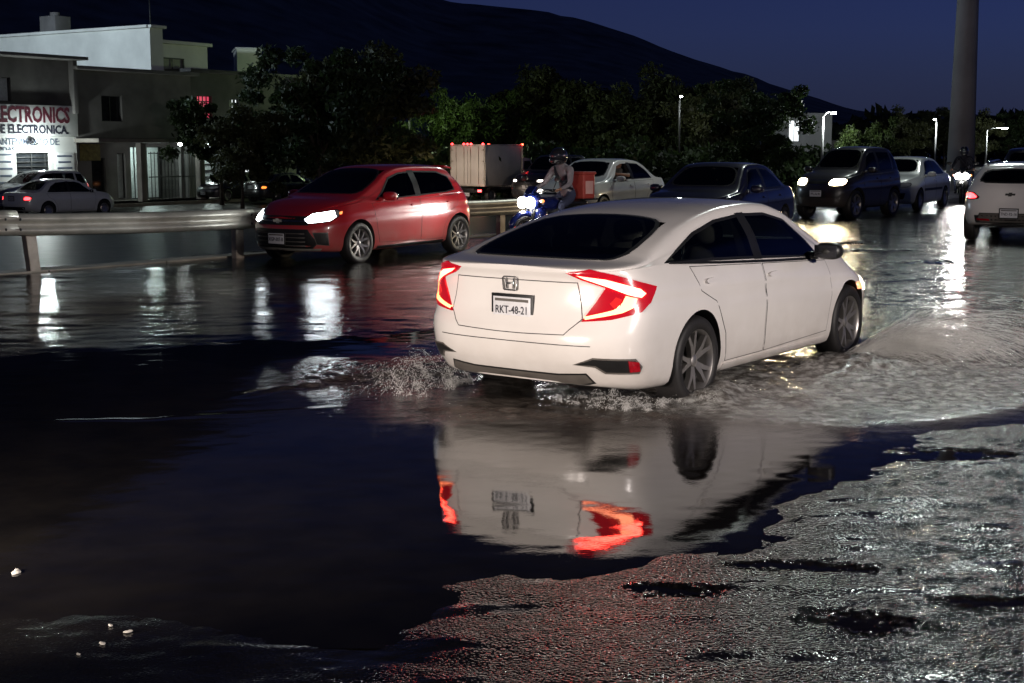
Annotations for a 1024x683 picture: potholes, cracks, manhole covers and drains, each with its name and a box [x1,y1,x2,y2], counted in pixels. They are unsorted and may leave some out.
pothole [623,581,729,598]
pothole [710,559,902,574]
pothole [788,606,962,638]
pothole [930,595,1024,612]
